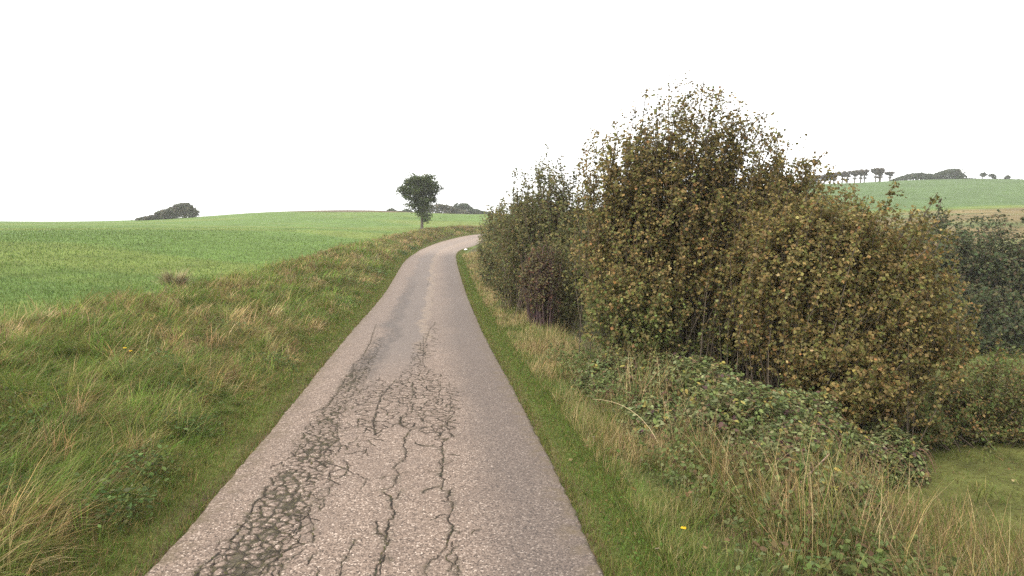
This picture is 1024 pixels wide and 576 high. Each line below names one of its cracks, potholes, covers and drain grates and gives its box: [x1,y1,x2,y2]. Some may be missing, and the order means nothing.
crack [194,318,479,576]
